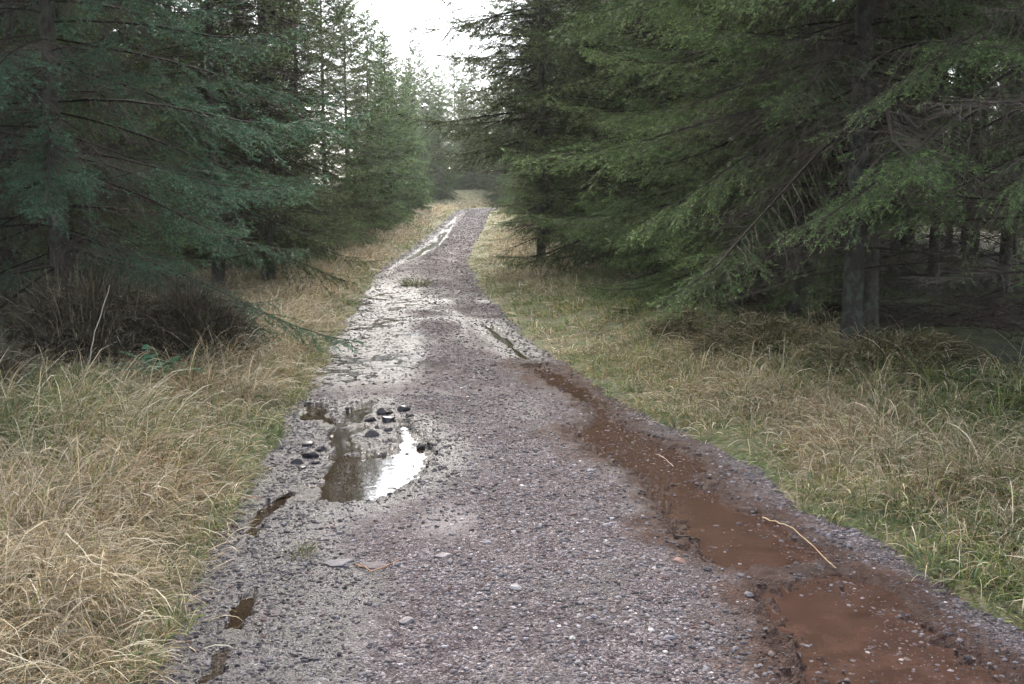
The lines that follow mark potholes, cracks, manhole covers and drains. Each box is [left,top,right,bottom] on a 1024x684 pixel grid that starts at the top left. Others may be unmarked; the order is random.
pothole [517,359,848,577]
pothole [257,399,443,519]
pothole [192,644,240,684]
pothole [744,569,1024,684]
pothole [242,490,299,536]
pothole [210,587,260,643]
